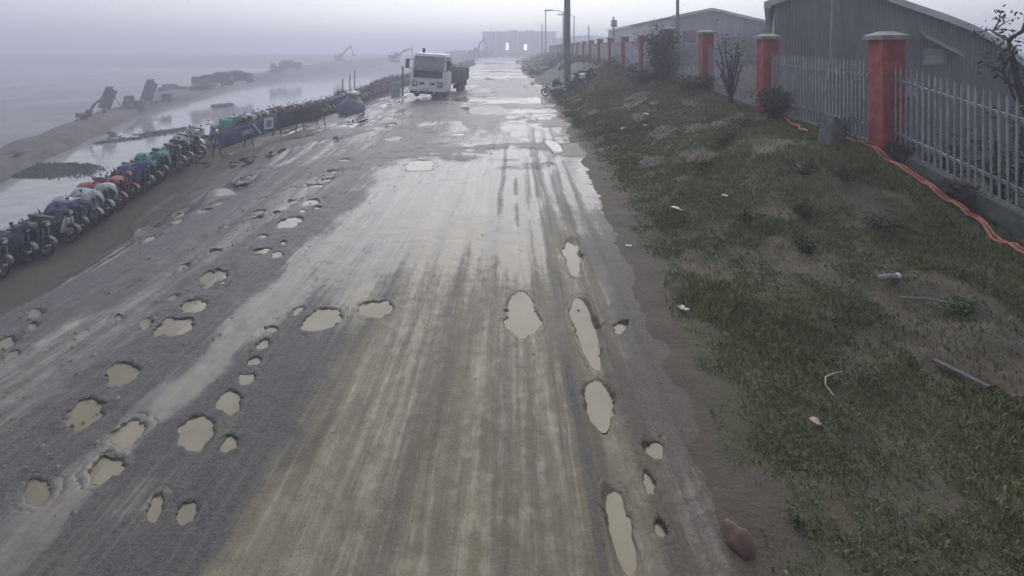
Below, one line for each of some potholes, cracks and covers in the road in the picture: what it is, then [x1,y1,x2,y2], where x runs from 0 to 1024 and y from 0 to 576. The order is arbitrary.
pothole [592,477,645,576]
pothole [350,297,401,321]
pothole [565,294,609,379]
pothole [632,432,673,465]
pothole [94,358,152,391]
pothole [189,265,235,290]
pothole [11,472,64,513]
pothole [571,374,624,440]
pothole [133,485,175,531]
pothole [49,392,116,437]
pothole [398,158,440,172]
pothole [98,413,157,458]
